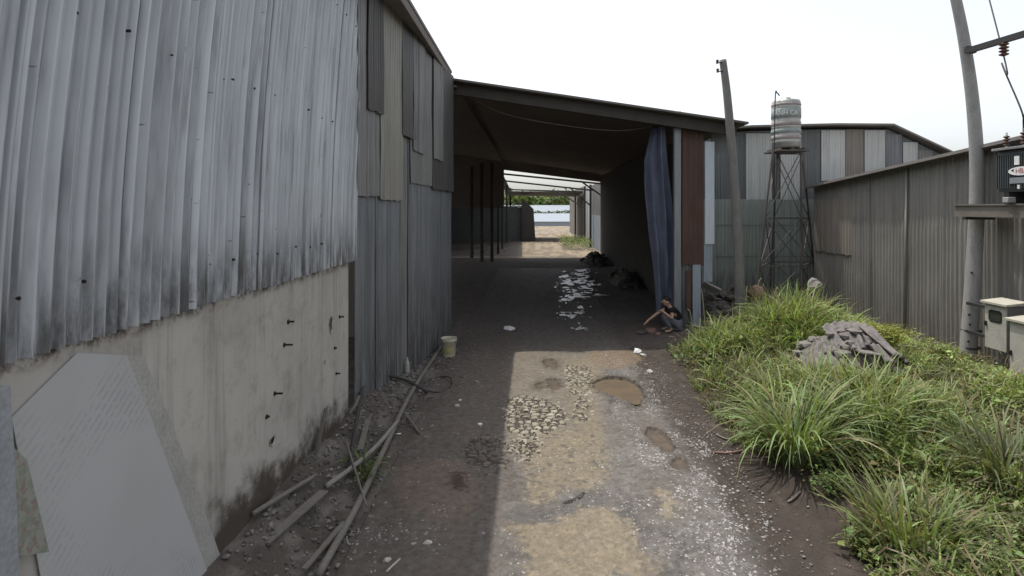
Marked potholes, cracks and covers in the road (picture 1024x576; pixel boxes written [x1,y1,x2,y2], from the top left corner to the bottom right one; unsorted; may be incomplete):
pothole [645,426,678,452]
pothole [542,358,559,369]
pothole [545,378,561,390]
pothole [591,376,647,406]
pothole [670,457,690,470]
